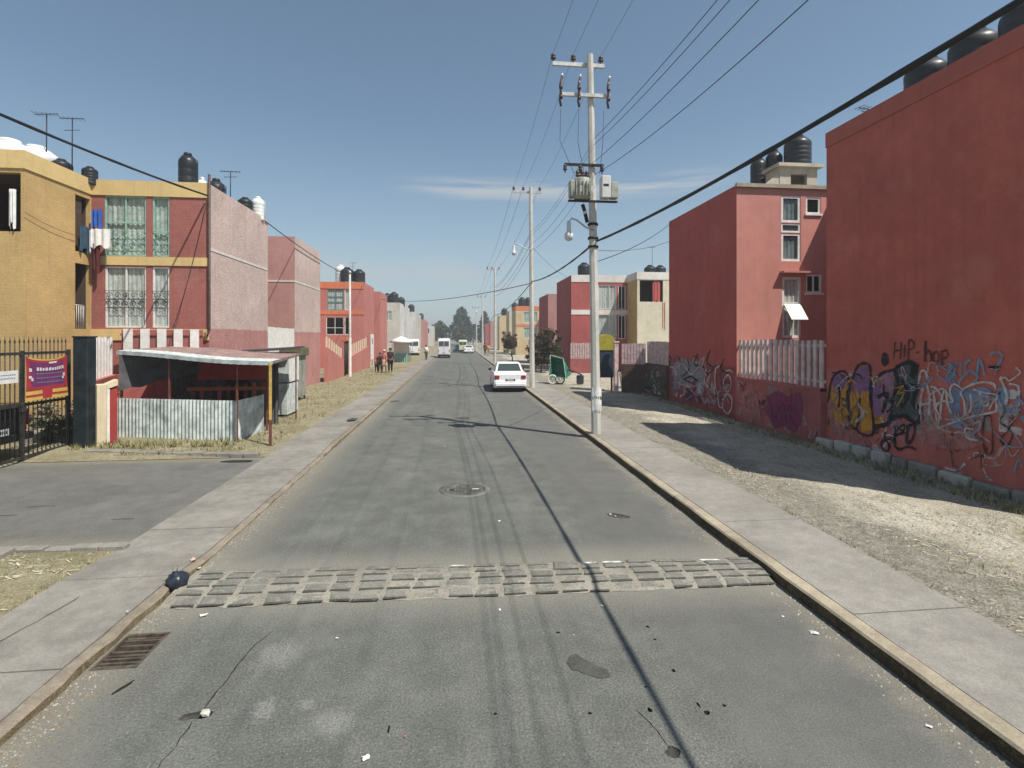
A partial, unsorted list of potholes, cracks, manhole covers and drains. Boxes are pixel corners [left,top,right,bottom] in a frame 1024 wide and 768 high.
drain grate [88,632,171,671]
manhole cover [439,482,490,497]
crack [158,631,272,768]
pothole [664,746,681,758]
pothole [178,709,214,721]
